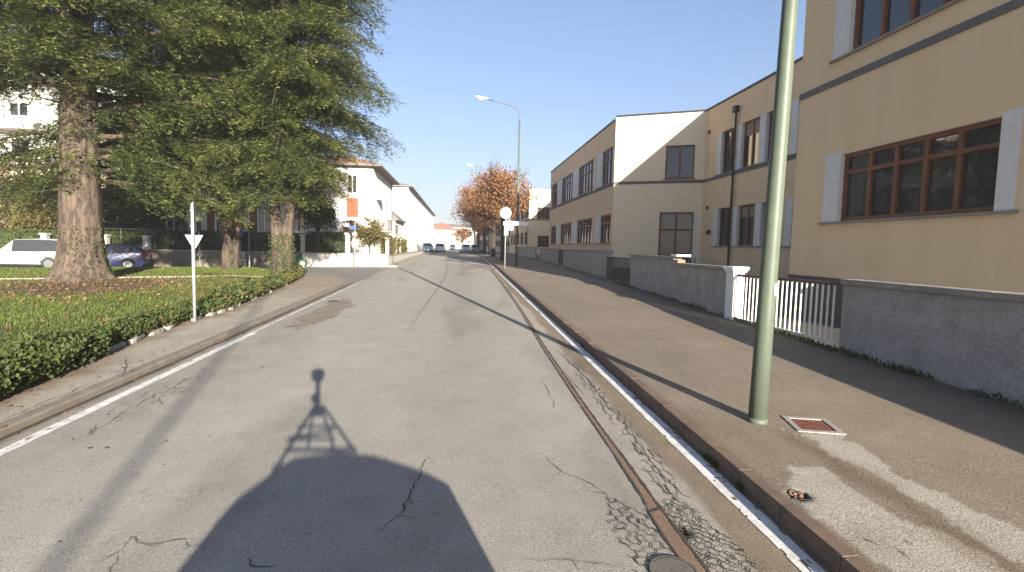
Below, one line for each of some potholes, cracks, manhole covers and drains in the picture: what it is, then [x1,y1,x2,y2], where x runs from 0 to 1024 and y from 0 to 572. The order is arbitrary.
manhole cover [649,556,699,572]
crack [490,270,763,572]
crack [70,369,205,442]
crack [380,458,428,531]
crack [95,537,197,572]
